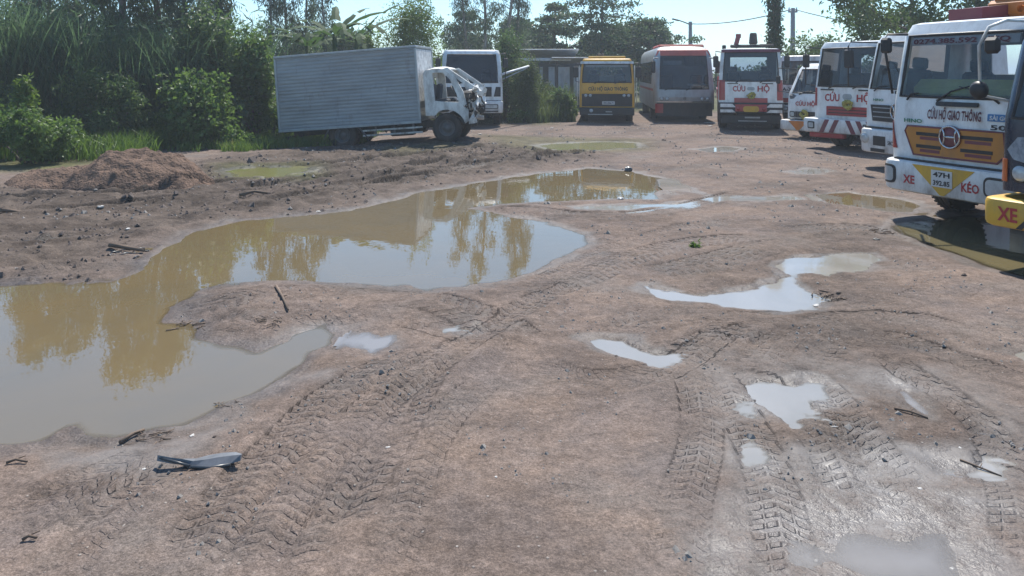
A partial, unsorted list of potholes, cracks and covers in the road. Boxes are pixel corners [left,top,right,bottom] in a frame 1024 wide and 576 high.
pothole [0,167,672,455]
pothole [569,330,695,371]
pothole [717,369,853,432]
pothole [633,250,893,315]
pothole [713,436,789,477]
